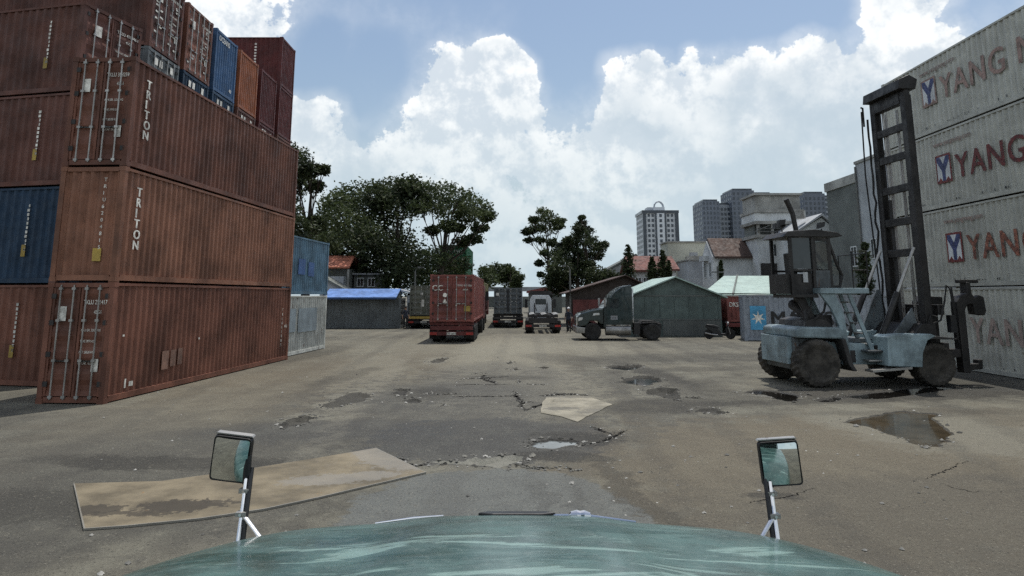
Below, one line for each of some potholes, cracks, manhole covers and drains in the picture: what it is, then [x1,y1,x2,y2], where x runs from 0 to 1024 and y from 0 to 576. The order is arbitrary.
pothole [614,376,662,385]
crack [927,460,988,492]
crack [459,373,588,410]
pothole [323,392,371,408]
pothole [434,455,523,468]
pothole [279,415,316,428]
pothole [744,390,800,402]
pothole [843,410,955,447]
pothole [531,438,581,449]
pothole [643,387,682,400]
